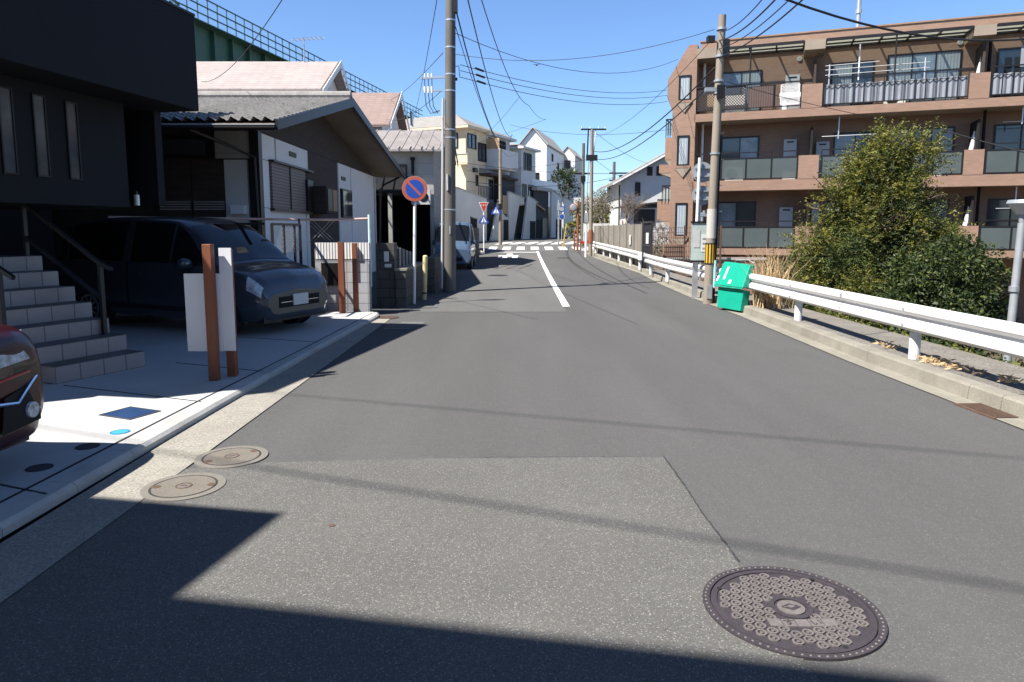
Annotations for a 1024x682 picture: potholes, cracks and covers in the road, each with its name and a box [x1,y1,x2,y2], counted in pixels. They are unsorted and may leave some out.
manhole cover [194,446,268,469]
drain grate [953,403,1018,420]
manhole cover [140,473,226,502]
manhole cover [702,566,888,662]
